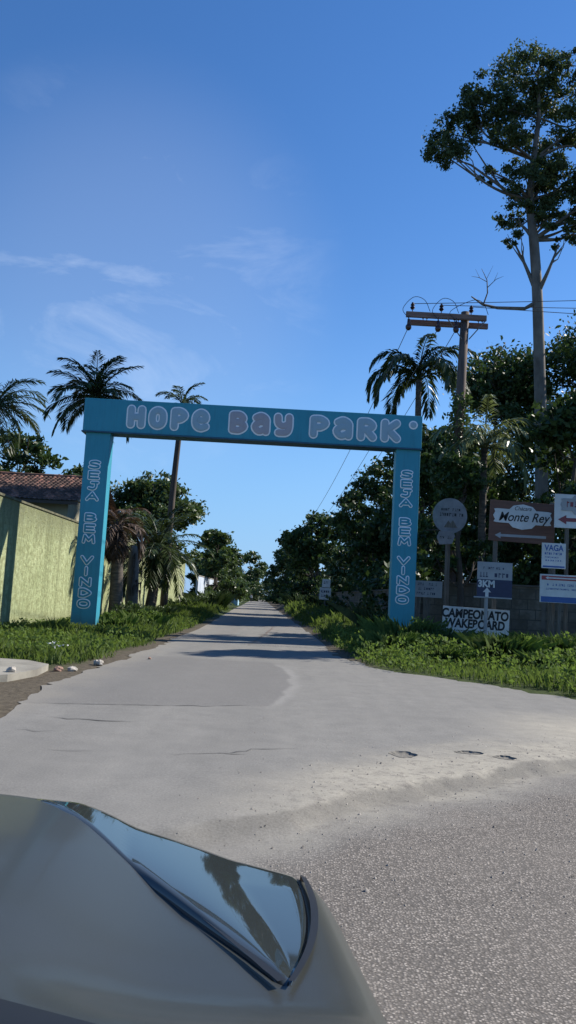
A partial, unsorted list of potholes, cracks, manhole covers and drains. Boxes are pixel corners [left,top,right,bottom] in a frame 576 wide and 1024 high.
crack [27,702,272,731]
